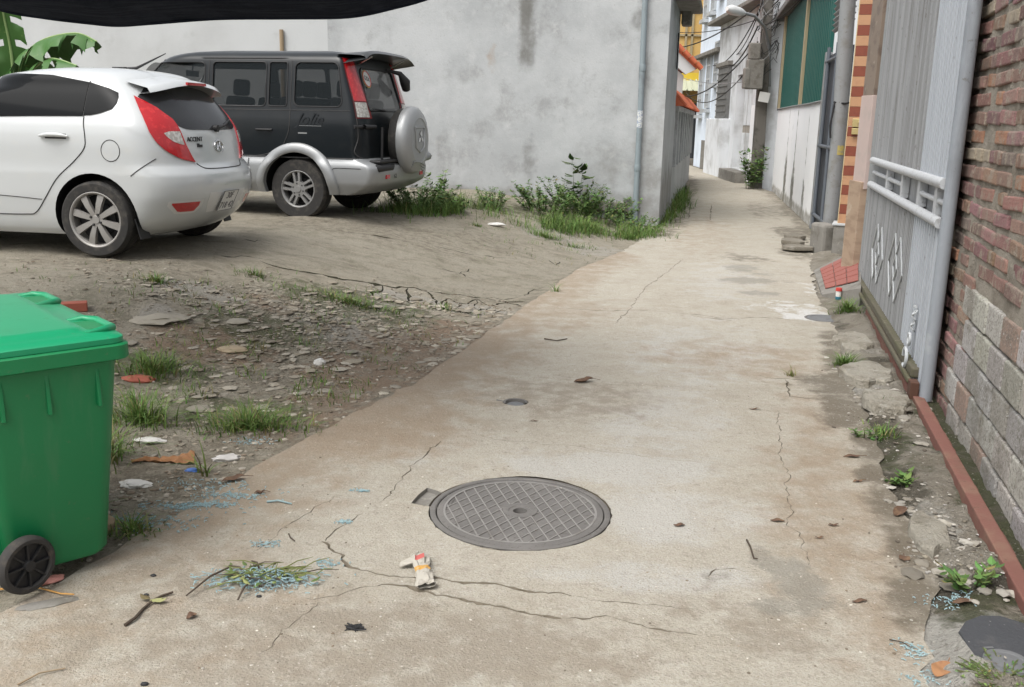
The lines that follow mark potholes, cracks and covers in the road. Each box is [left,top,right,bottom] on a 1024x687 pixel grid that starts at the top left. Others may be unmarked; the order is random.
crack [776,411,810,565]
crack [255,500,696,635]
manhole cover [412,477,612,551]
crack [224,239,535,316]
manhole cover [804,314,833,324]
manhole cover [496,398,528,406]
